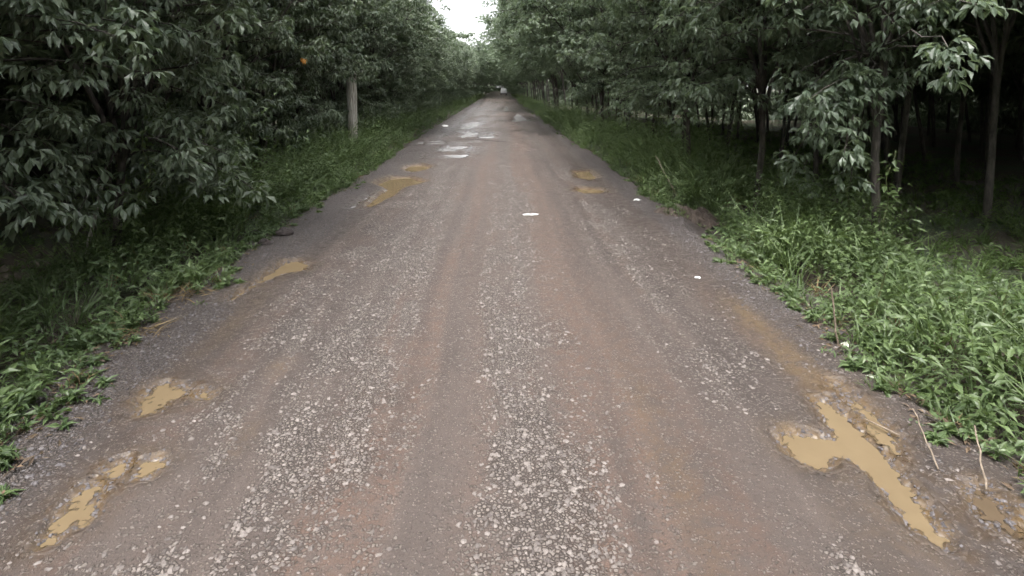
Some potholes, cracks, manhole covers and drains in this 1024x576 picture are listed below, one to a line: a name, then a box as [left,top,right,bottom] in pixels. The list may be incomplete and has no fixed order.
pothole [117,447,181,488]
pothole [452,130,481,138]
pothole [20,473,117,556]
pothole [567,186,611,194]
pothole [123,377,202,421]
pothole [218,256,316,303]
pothole [362,174,431,207]
pothole [86,448,141,485]
pothole [763,389,969,562]
pothole [1013,496,1024,554]
pothole [457,120,489,129]
